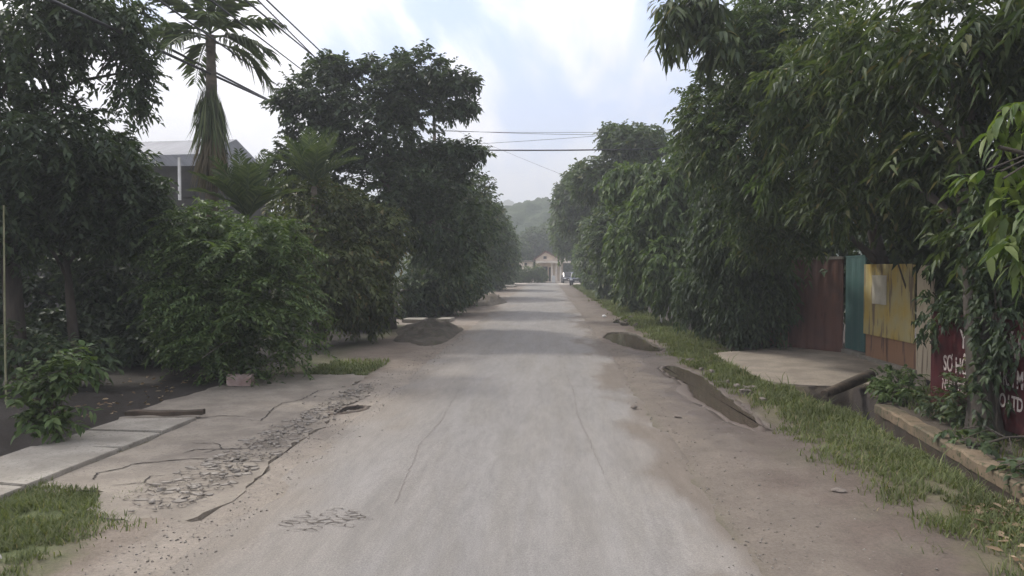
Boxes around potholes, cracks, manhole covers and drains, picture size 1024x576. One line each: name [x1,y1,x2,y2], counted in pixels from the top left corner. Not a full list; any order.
crack [394,389,460,503]
pothole [598,331,666,353]
pothole [659,364,773,432]
crack [92,387,369,508]
pothole [325,405,372,415]
crack [279,508,373,531]
